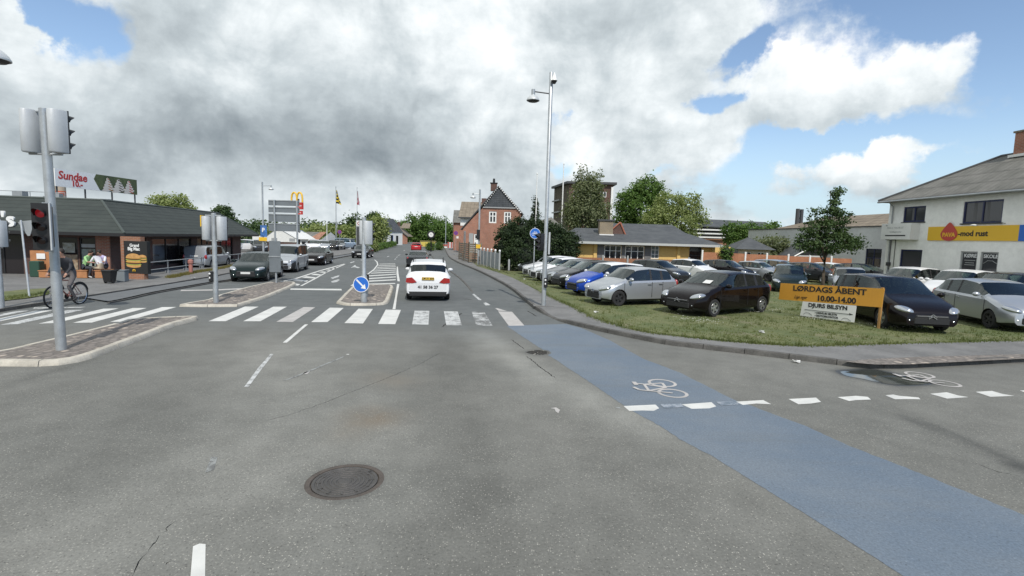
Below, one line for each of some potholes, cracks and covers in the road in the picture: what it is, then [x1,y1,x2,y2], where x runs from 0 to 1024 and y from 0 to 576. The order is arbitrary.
manhole cover [304,464,384,500]
